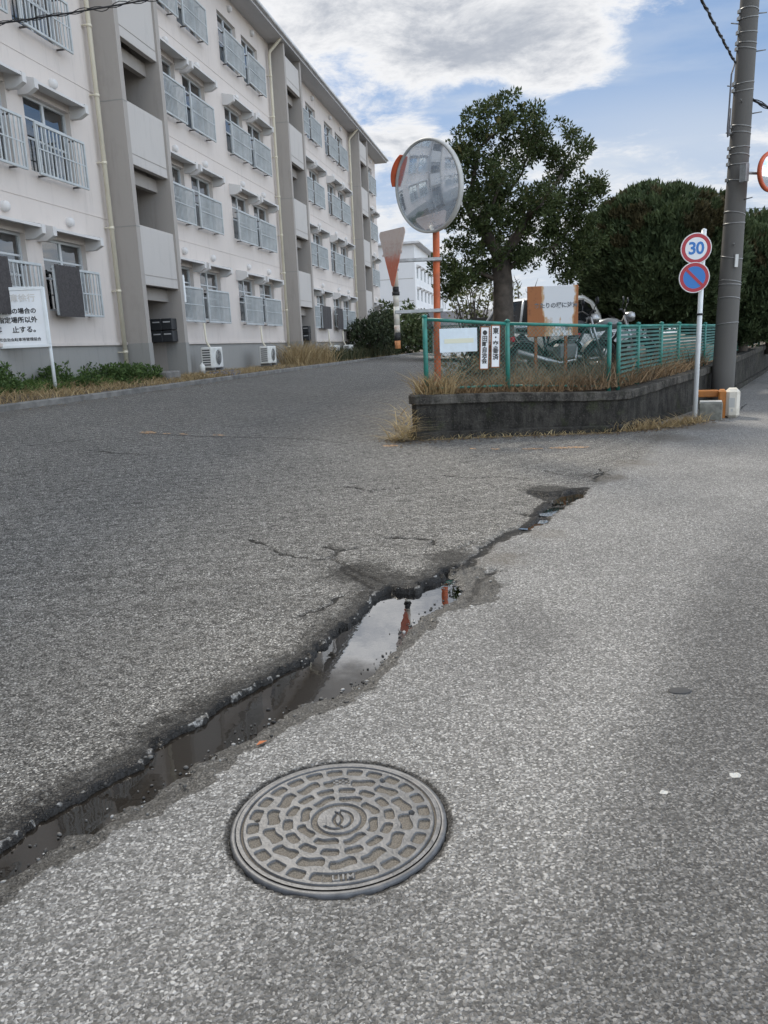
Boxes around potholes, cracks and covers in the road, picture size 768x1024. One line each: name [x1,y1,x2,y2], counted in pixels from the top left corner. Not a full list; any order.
pothole [522,487,590,531]
crack [247,512,536,617]
pothole [0,564,502,906]
manhole cover [230,763,447,900]
